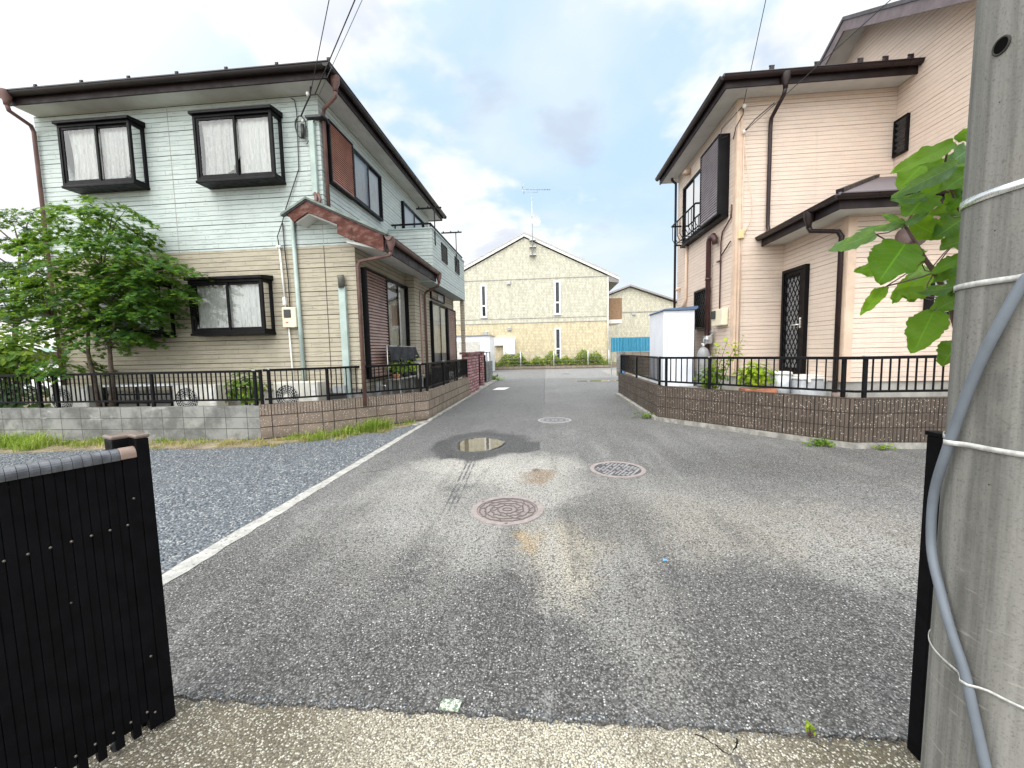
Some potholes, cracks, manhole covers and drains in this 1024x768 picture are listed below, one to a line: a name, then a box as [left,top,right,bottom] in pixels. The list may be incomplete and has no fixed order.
manhole cover [471,496,543,526]
pothole [457,437,508,452]
crack [694,734,739,755]
manhole cover [590,461,646,478]
